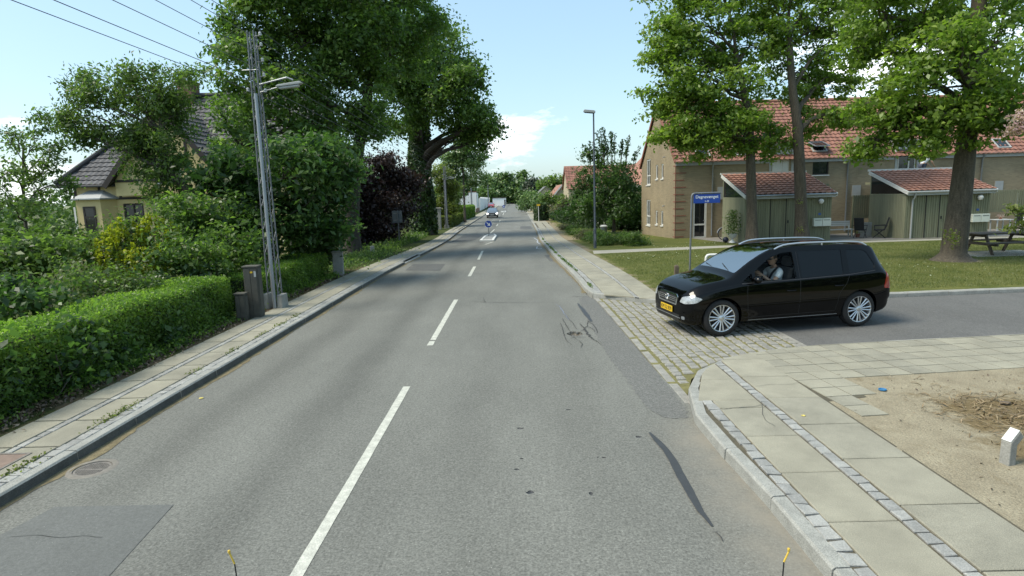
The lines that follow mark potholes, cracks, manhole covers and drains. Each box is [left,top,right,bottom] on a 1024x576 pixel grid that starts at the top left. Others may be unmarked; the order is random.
crack [476,300,599,347]
